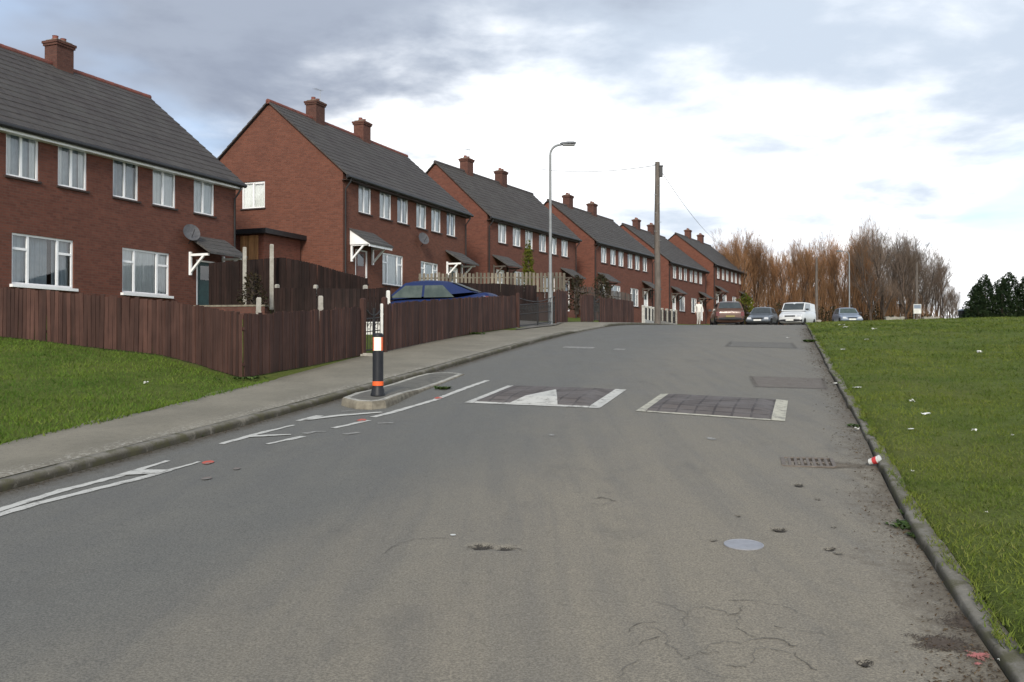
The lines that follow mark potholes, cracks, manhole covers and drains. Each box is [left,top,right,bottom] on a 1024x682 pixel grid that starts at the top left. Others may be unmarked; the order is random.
crack [629,600,835,677]
manhole cover [724,539,764,550]
drain grate [781,456,837,468]
